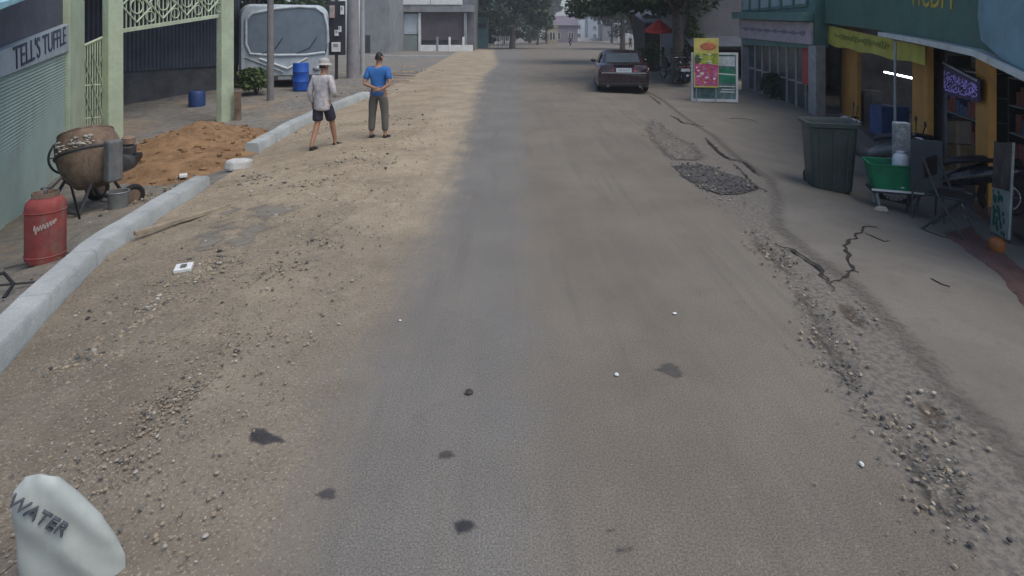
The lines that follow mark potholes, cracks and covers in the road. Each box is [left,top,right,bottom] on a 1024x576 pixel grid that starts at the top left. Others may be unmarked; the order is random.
crack [776,226,888,290]
crack [650,96,765,190]
